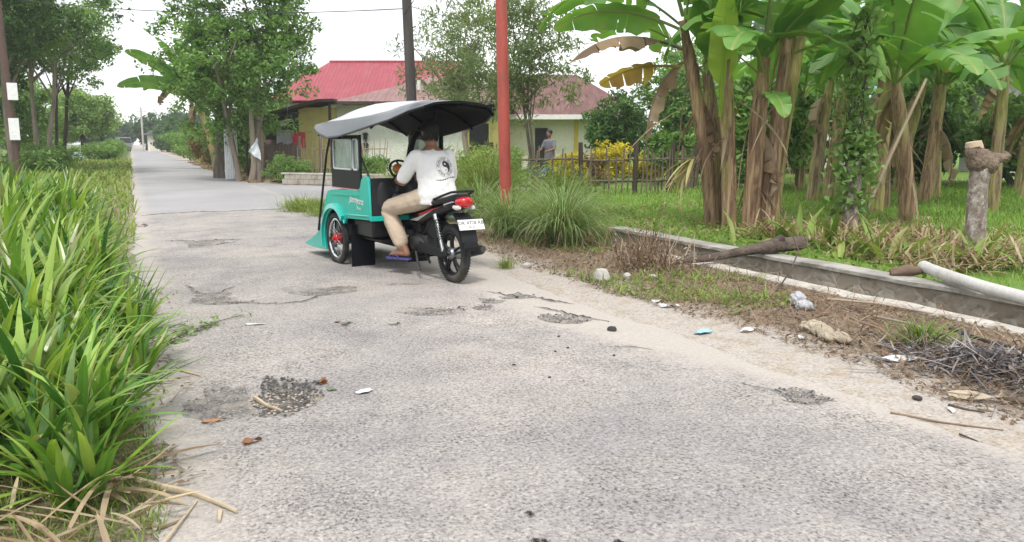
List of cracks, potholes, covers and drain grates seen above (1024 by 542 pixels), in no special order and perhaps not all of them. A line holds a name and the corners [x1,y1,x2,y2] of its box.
pothole [288,285,357,296]
crack [487,291,609,322]
pothole [537,313,592,324]
pothole [778,387,833,405]
pothole [248,375,325,418]
crack [185,285,345,304]
pothole [395,307,467,316]
